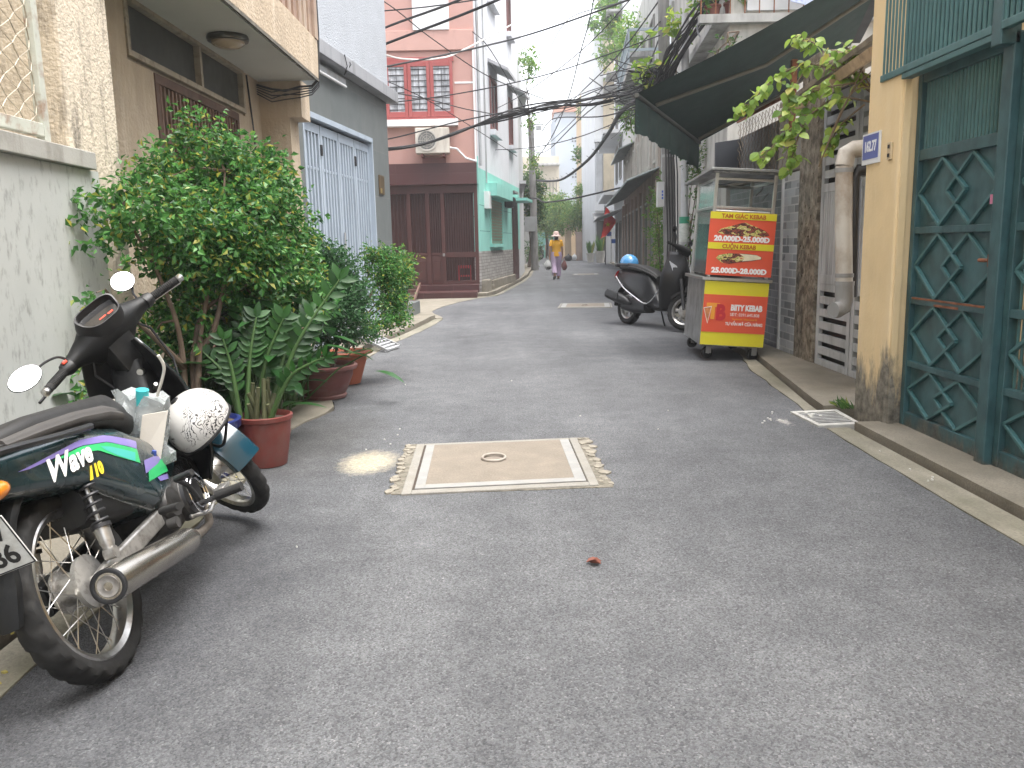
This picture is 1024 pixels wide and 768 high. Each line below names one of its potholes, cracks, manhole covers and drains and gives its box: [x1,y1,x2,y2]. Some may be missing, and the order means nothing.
drain grate [790,409,857,430]
manhole cover [384,437,614,496]
